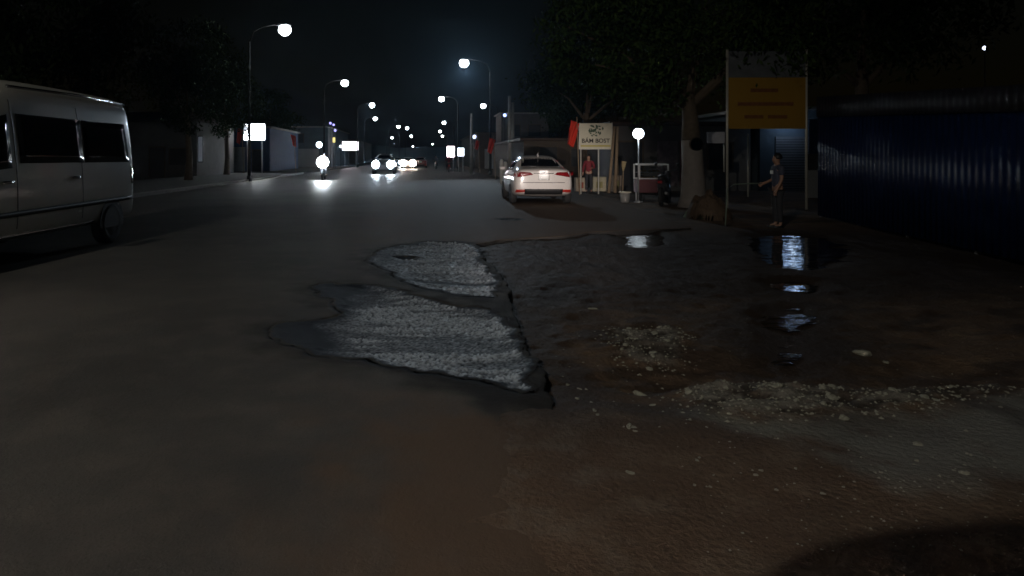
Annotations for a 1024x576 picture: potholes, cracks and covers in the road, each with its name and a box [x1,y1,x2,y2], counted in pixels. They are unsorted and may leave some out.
pothole [366,241,502,297]
pothole [268,283,540,393]
